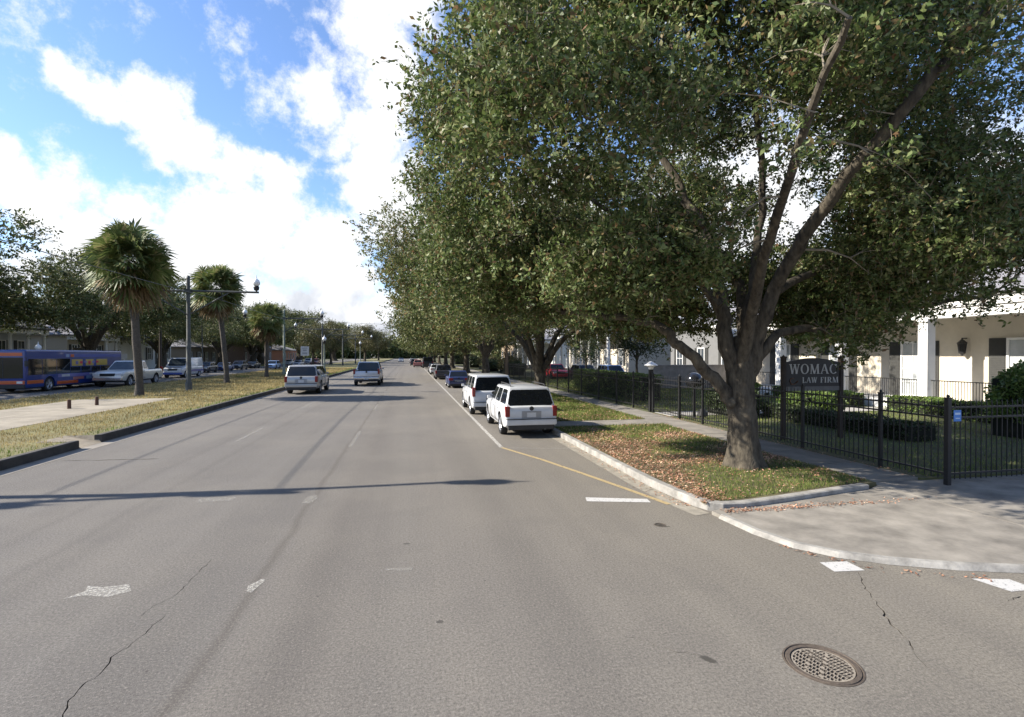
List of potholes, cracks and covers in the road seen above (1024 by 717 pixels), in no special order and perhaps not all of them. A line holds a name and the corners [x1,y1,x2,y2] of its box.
crack [62,560,211,717]
crack [858,573,962,681]
manhole cover [782,643,866,687]
